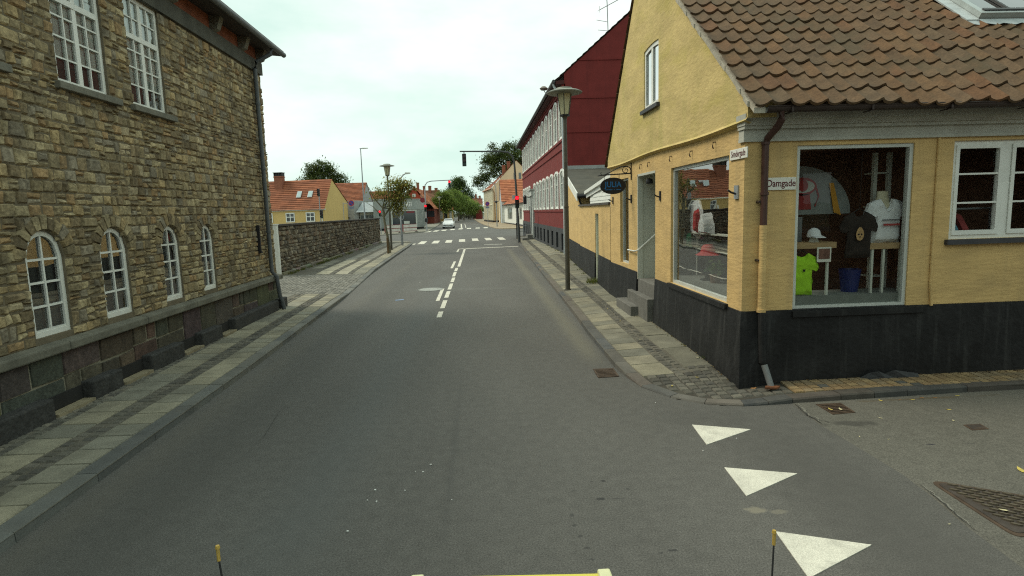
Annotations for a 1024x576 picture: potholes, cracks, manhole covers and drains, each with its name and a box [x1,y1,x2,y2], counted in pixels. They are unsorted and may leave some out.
drain grate [816,403,855,415]
drain grate [593,368,619,378]
manhole cover [933,481,1024,537]
